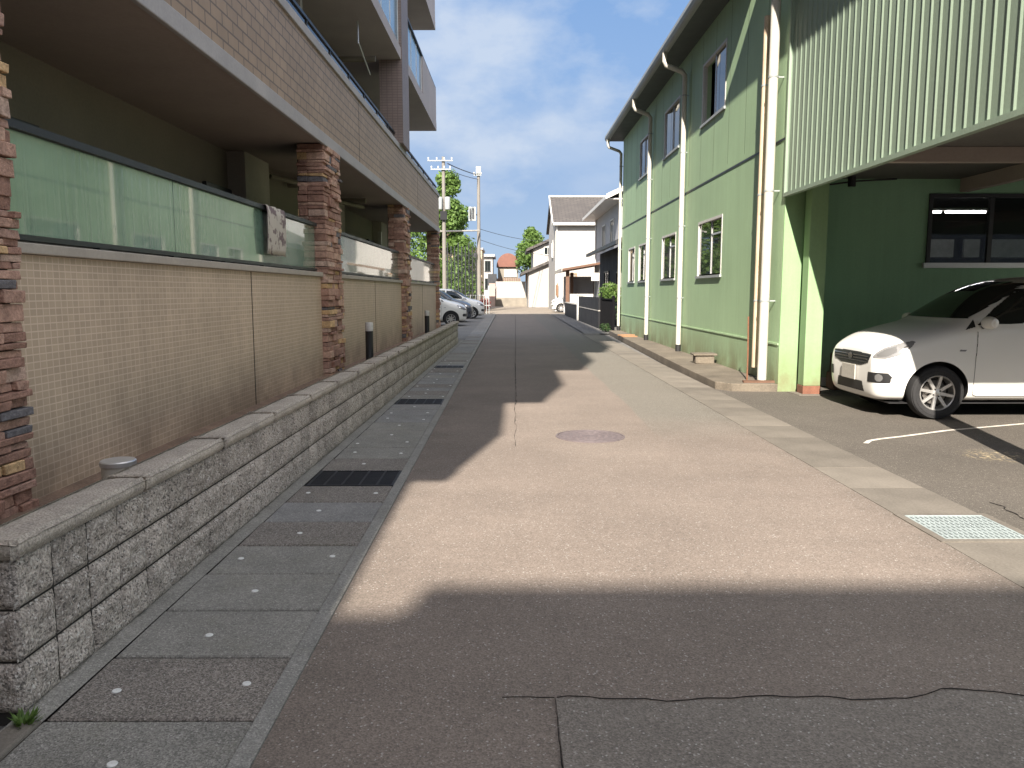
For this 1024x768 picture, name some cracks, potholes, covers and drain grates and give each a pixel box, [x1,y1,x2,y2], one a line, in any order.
drain grate [893,513,1024,543]
manhole cover [556,430,625,443]
drain grate [306,470,402,487]
